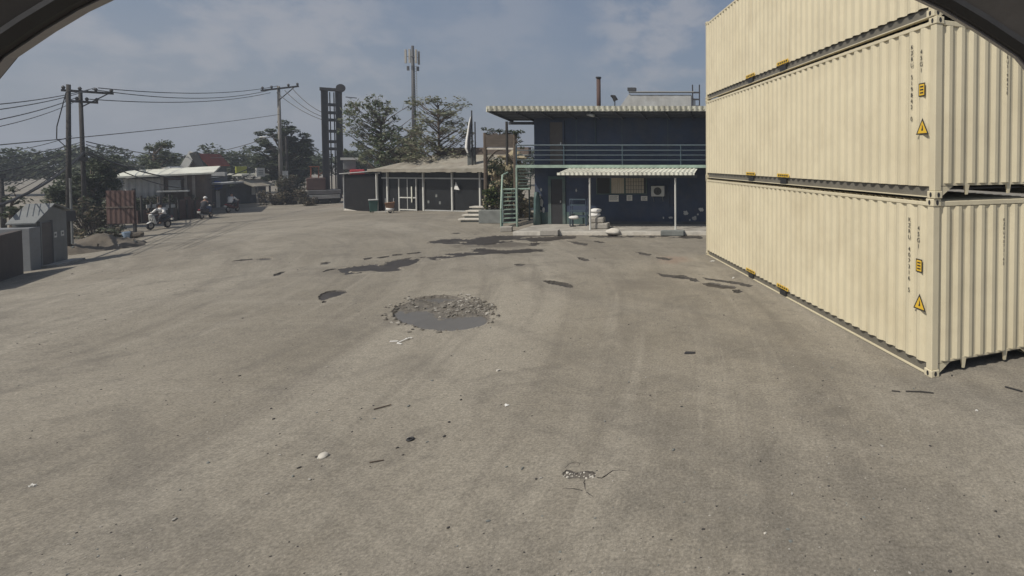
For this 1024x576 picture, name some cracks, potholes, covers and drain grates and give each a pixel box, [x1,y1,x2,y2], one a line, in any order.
pothole [391,295,490,331]
crack [562,462,624,496]
